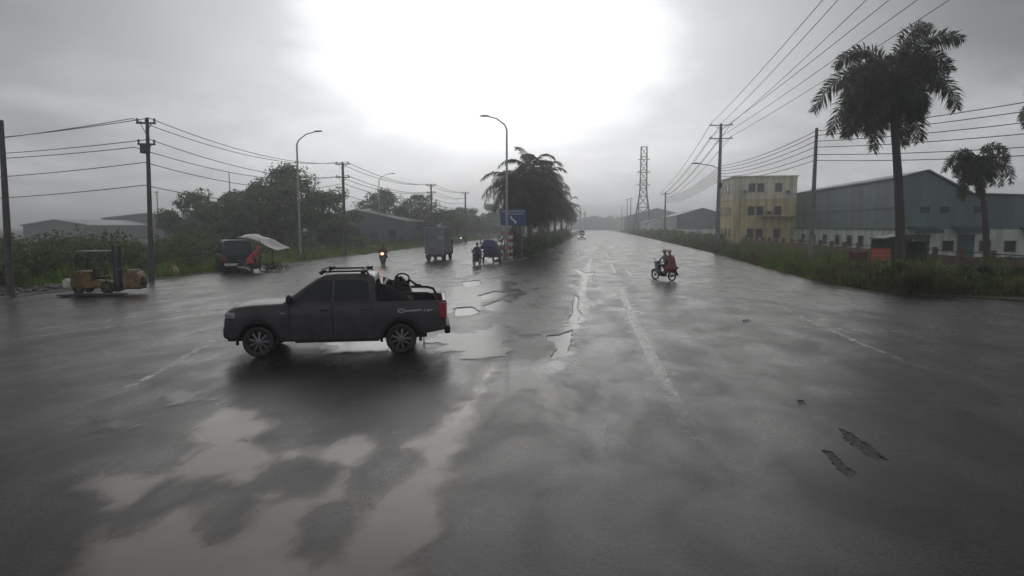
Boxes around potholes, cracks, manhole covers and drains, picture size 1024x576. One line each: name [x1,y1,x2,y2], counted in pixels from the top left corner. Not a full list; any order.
pothole [479,291,508,299]
pothole [838,428,888,463]
pothole [566,295,582,323]
pothole [821,450,857,478]
pothole [546,330,573,359]
pothole [454,307,480,316]
